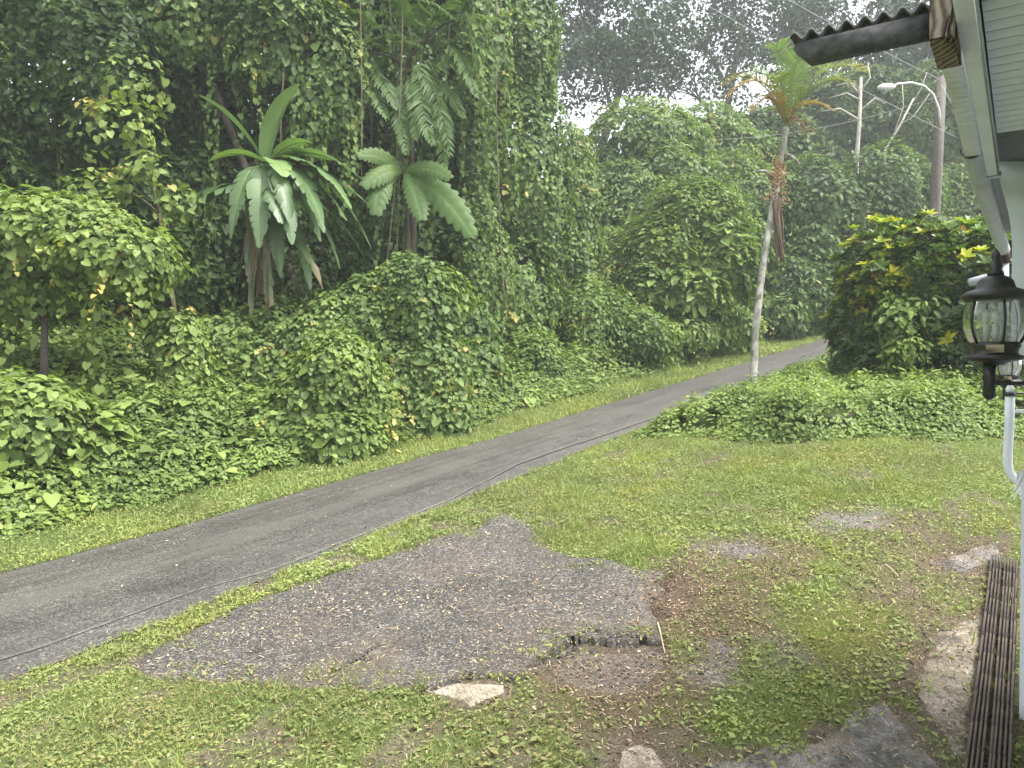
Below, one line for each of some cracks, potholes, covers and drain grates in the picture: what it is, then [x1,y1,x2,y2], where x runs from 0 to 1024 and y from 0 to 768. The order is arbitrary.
drain grate [964,554,1019,768]
crack [333,643,379,672]
